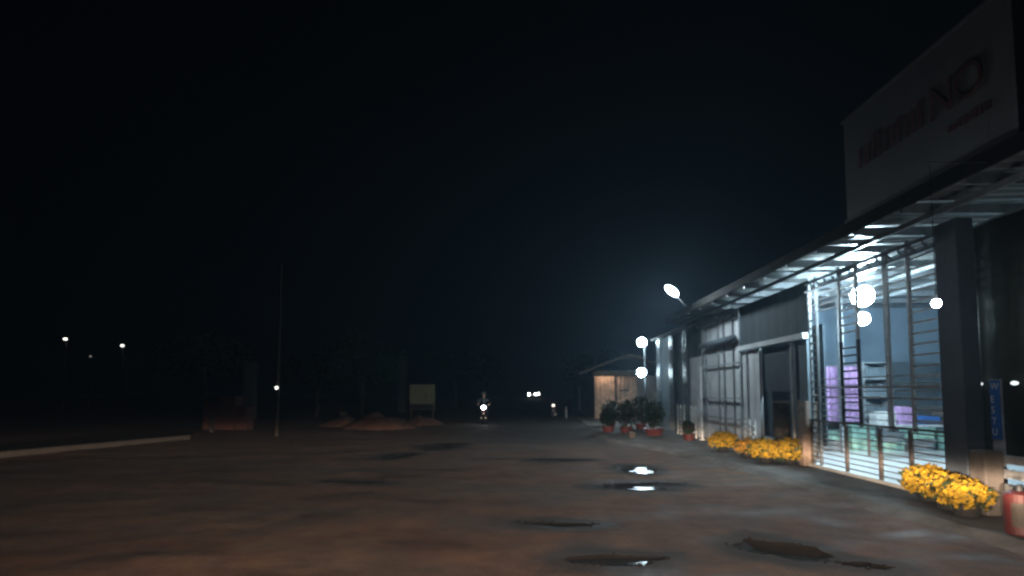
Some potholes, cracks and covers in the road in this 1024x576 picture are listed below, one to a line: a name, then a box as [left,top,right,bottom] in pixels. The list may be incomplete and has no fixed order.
pothole [614,464,659,474]
pothole [418,443,470,451]
pothole [725,537,836,563]
pothole [834,560,896,570]
pothole [591,481,689,490]
pothole [560,552,670,567]
